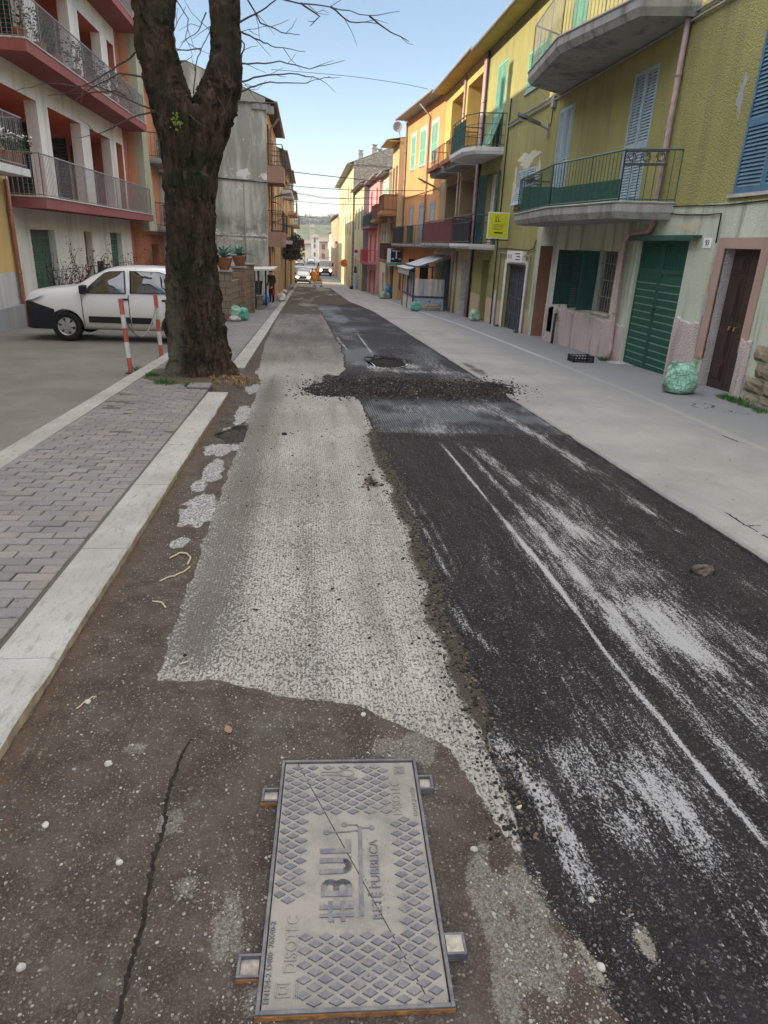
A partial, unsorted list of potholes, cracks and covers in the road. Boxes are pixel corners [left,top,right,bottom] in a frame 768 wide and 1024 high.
pothole [215,425,248,444]
manhole cover [235,758,468,1022]
crack [113,739,192,1024]
pothole [364,356,410,368]
crack [725,512,768,538]
